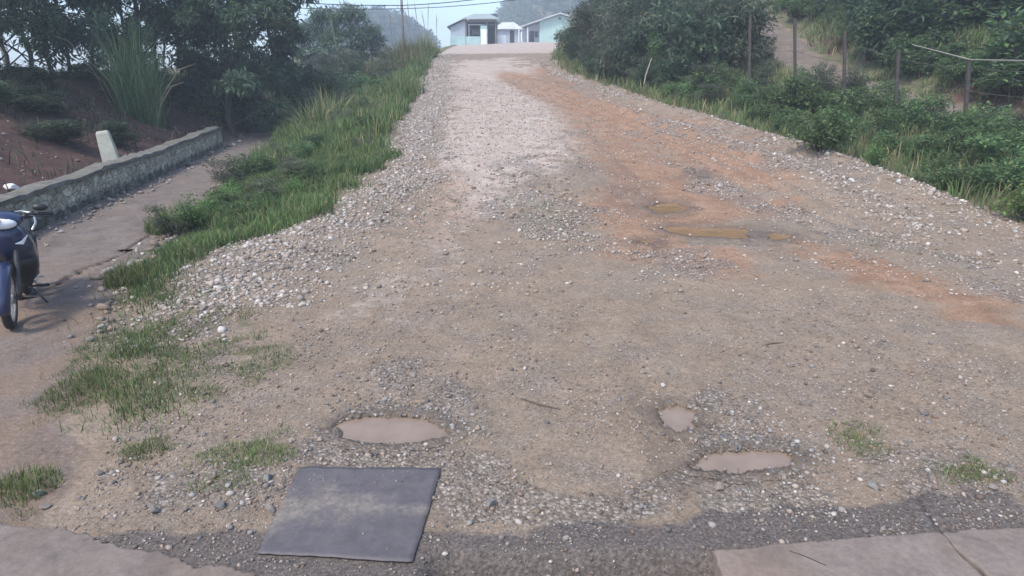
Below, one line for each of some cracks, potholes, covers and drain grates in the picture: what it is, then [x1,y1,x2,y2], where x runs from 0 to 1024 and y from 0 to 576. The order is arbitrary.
pothole [634,197,704,219]
pothole [646,221,769,246]
pothole [641,396,717,441]
pothole [746,226,808,246]
pothole [317,407,467,456]
pothole [671,436,815,484]
